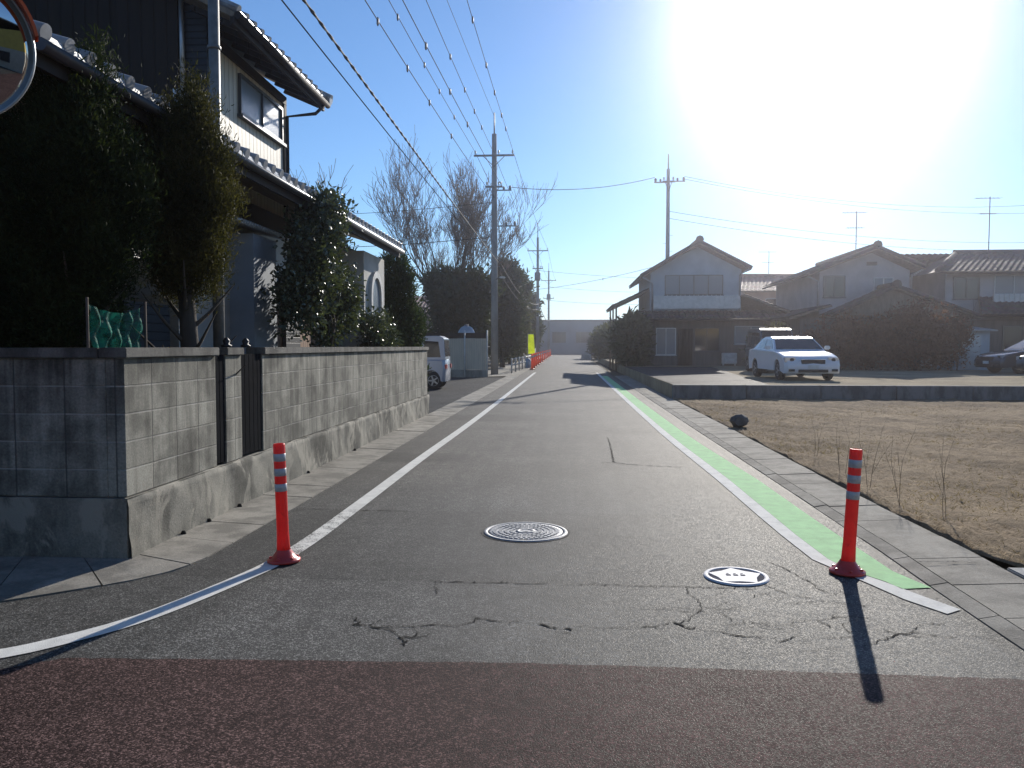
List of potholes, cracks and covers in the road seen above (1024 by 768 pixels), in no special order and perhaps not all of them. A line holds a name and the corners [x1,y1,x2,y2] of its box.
crack [643,560,995,651]
crack [352,616,513,645]
manhole cover [481,522,570,543]
manhole cover [703,567,770,586]
